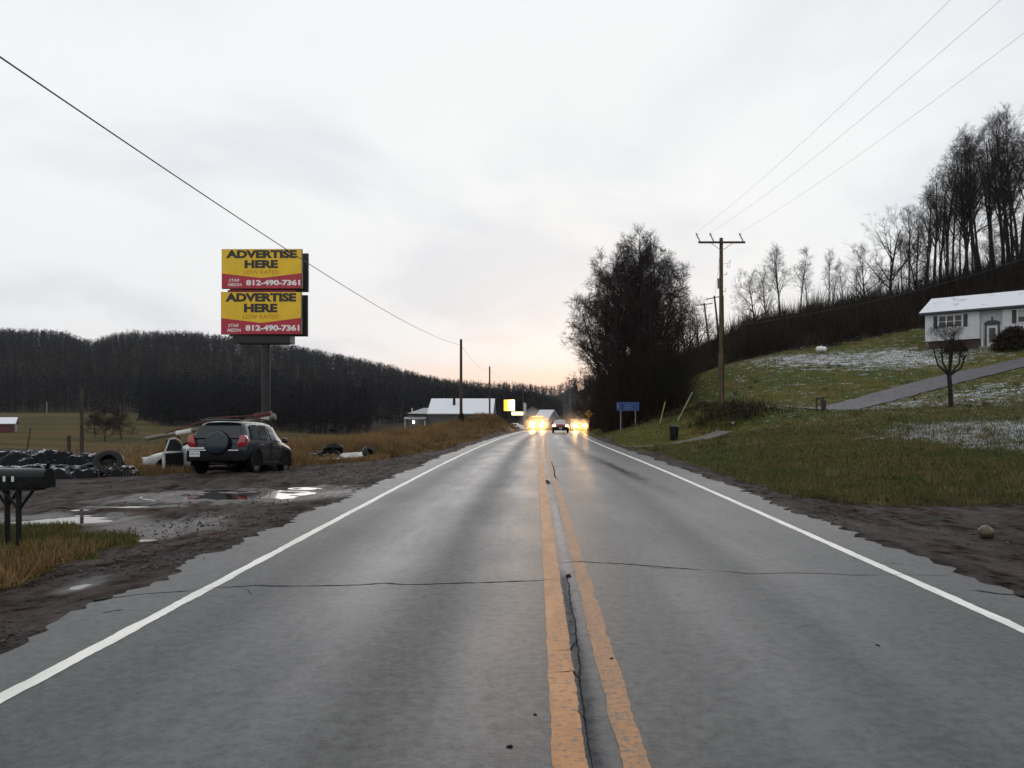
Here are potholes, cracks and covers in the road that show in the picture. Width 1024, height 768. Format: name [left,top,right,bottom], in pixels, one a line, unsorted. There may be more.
crack [563,562,944,576]
